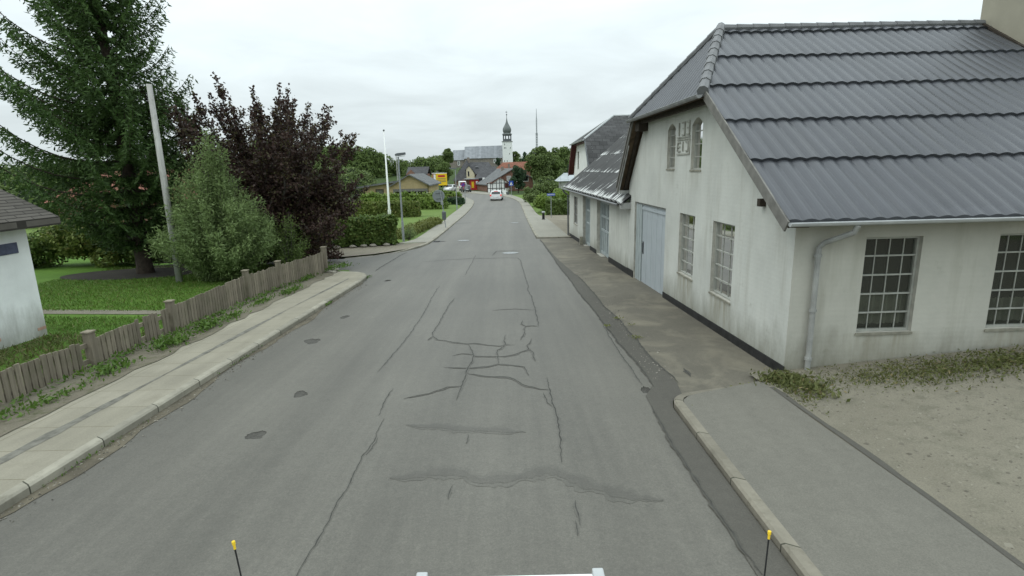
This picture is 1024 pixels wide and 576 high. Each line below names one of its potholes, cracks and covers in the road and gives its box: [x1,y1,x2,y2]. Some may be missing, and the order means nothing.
crack [296,240,691,576]
